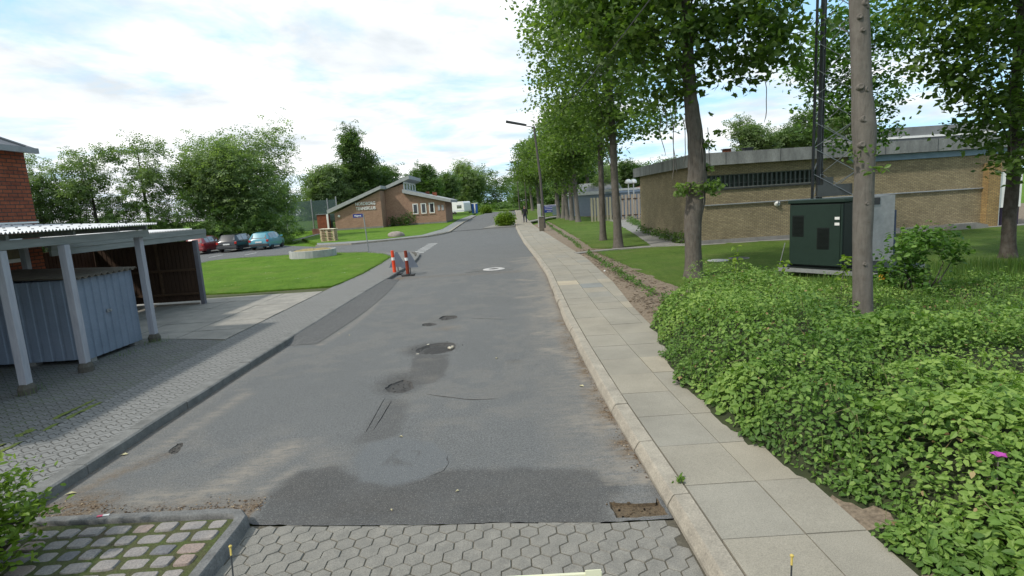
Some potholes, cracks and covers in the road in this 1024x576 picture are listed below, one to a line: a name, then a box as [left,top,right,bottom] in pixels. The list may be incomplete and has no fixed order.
pothole [385,380,414,393]
pothole [606,498,668,518]
